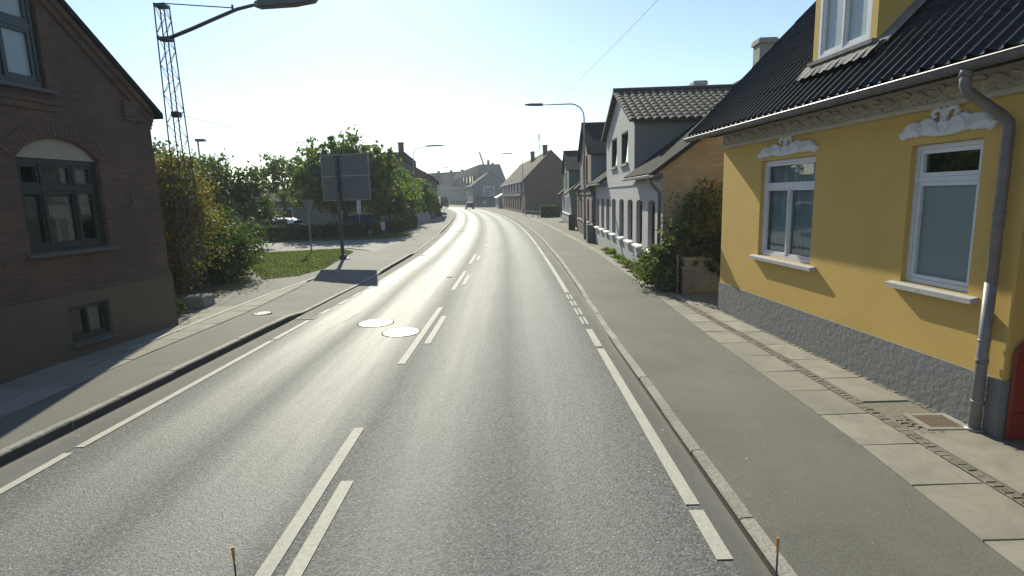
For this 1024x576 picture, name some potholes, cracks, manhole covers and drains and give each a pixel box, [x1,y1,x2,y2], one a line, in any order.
manhole cover [357,319,394,327]
manhole cover [382,327,421,337]
